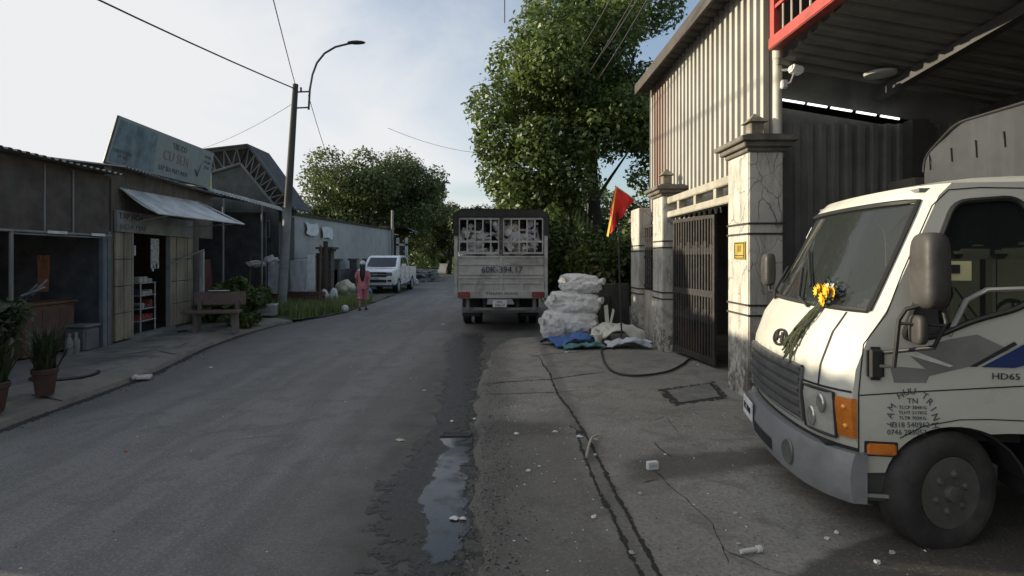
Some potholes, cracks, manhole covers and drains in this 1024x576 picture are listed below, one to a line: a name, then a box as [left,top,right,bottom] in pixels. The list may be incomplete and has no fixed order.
manhole cover [657,381,727,406]
crack [486,351,787,576]
